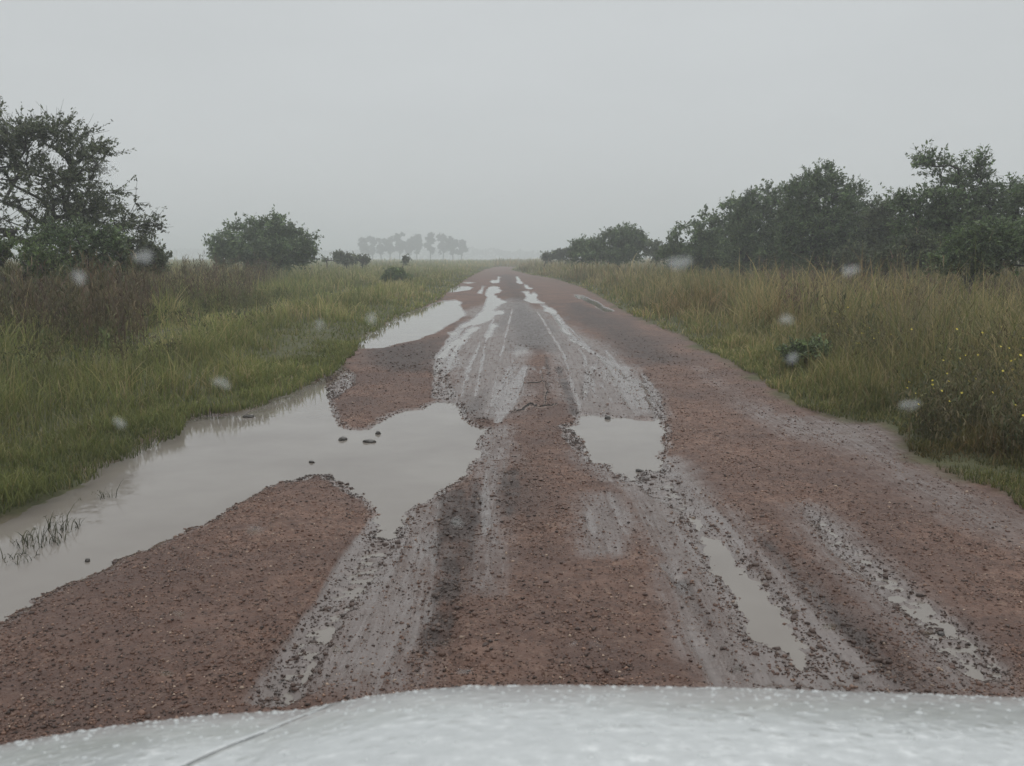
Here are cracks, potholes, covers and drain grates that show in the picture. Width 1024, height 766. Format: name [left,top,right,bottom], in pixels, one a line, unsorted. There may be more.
pothole [316,398,498,545]
pothole [554,410,687,510]
